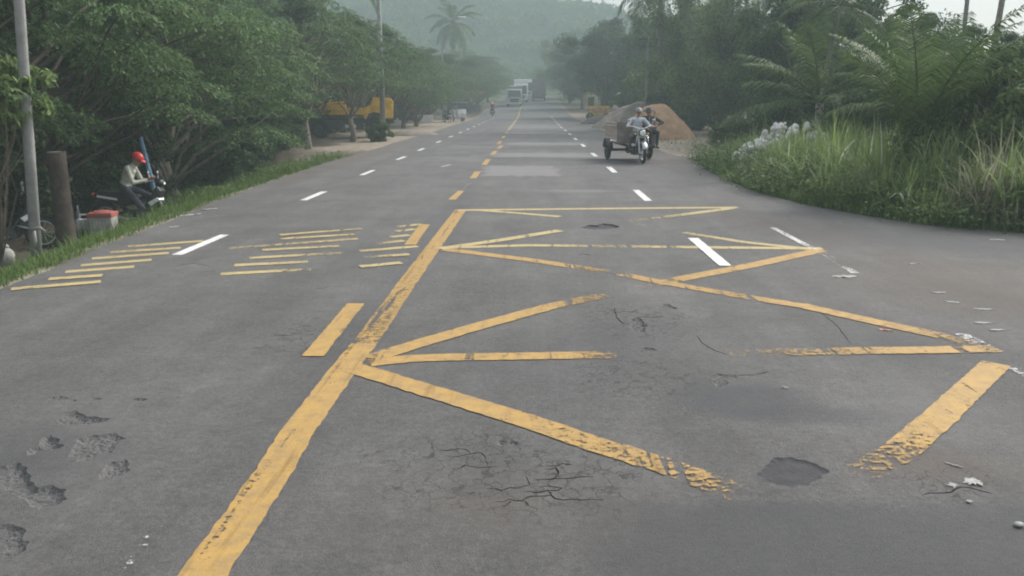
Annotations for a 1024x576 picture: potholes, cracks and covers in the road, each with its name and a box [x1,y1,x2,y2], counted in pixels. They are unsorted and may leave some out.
crack [442,448,489,470]
pothole [757,457,830,487]
pothole [56,409,110,426]
crack [924,487,989,495]
pothole [98,459,131,480]
pothole [0,462,67,510]
crack [492,463,596,506]
pothole [69,432,126,462]
pothole [26,435,65,456]
pothole [0,524,30,559]
